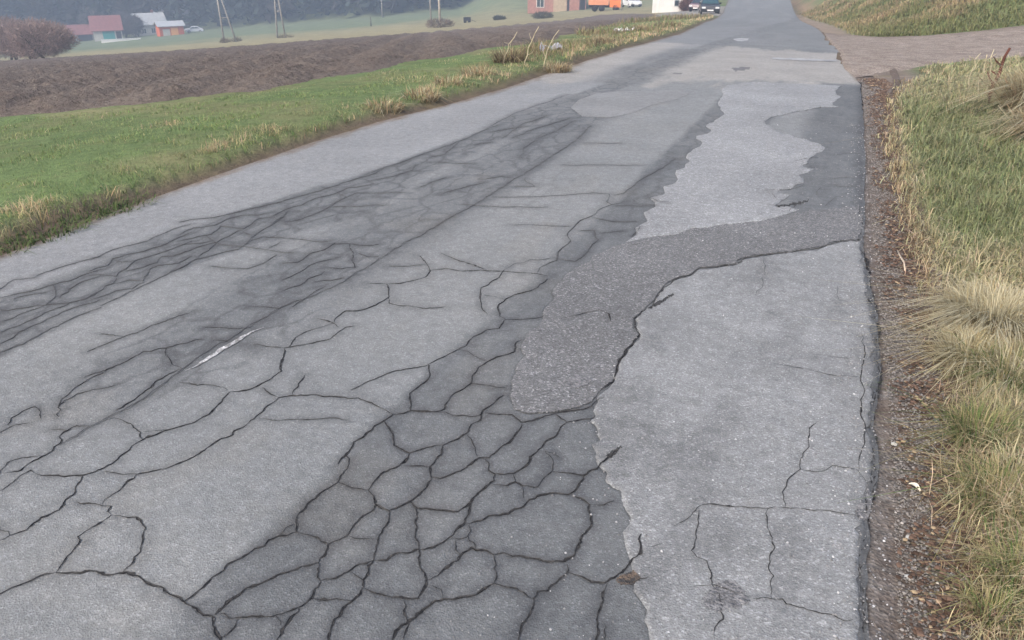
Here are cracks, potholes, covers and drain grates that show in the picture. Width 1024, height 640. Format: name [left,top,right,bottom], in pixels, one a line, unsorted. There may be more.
crack [0,82,883,640]
